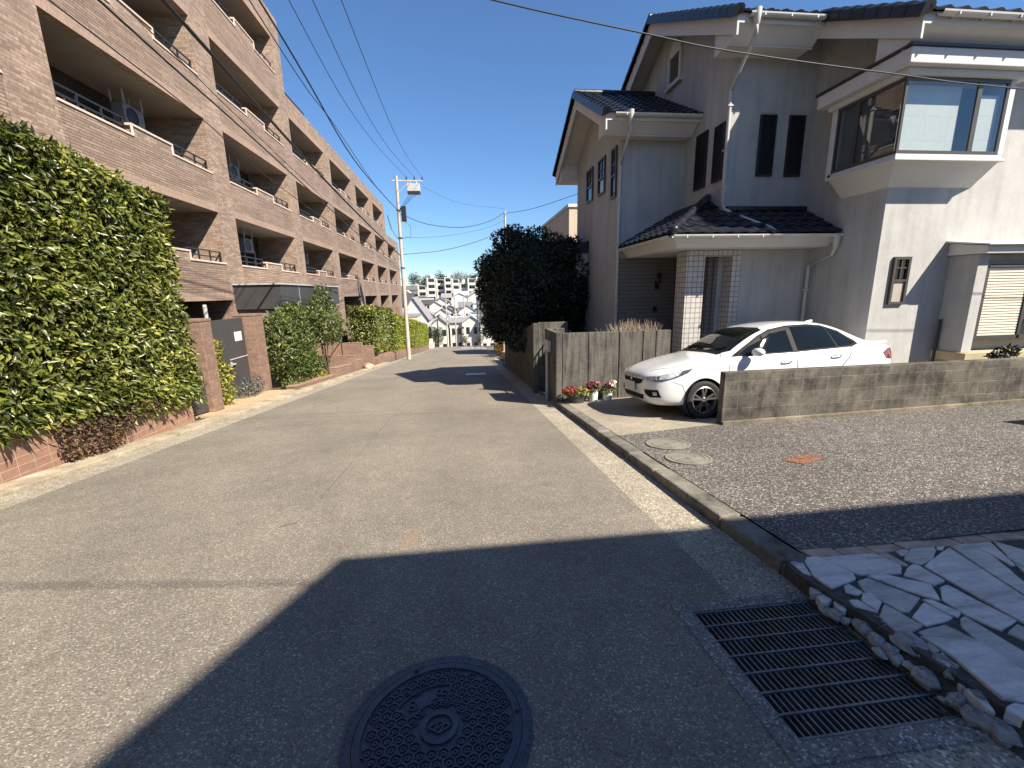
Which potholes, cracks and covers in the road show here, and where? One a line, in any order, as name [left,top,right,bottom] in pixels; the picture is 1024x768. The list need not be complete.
crack [321,395,412,498]
utility cover [665,451,713,465]
manhole cover [338,656,533,768]
drain grate [671,591,993,768]
utility cover [646,438,691,450]
